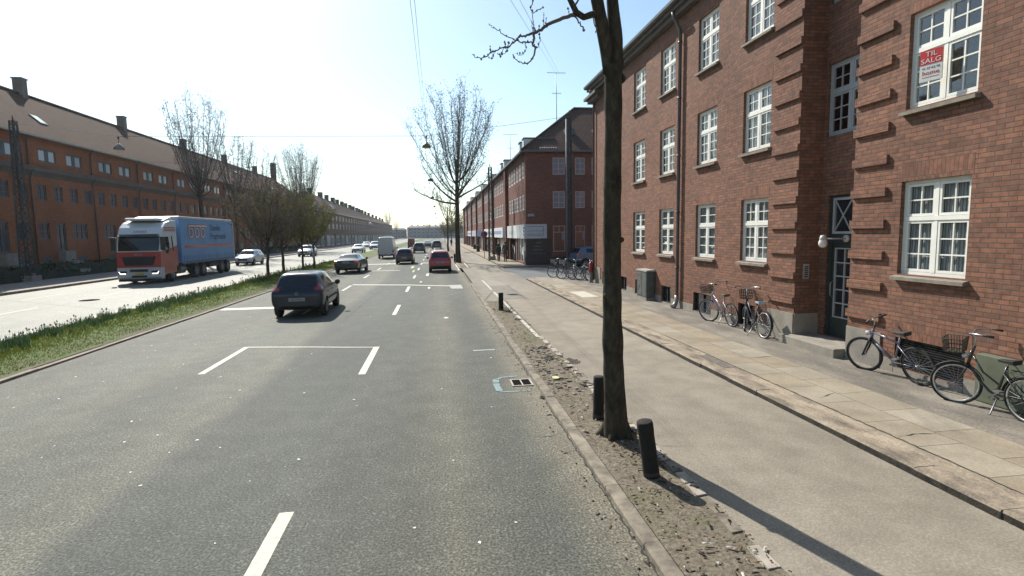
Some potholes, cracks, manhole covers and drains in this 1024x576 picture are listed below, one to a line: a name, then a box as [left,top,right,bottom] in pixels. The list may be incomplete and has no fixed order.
drain grate [509,378,534,387]
